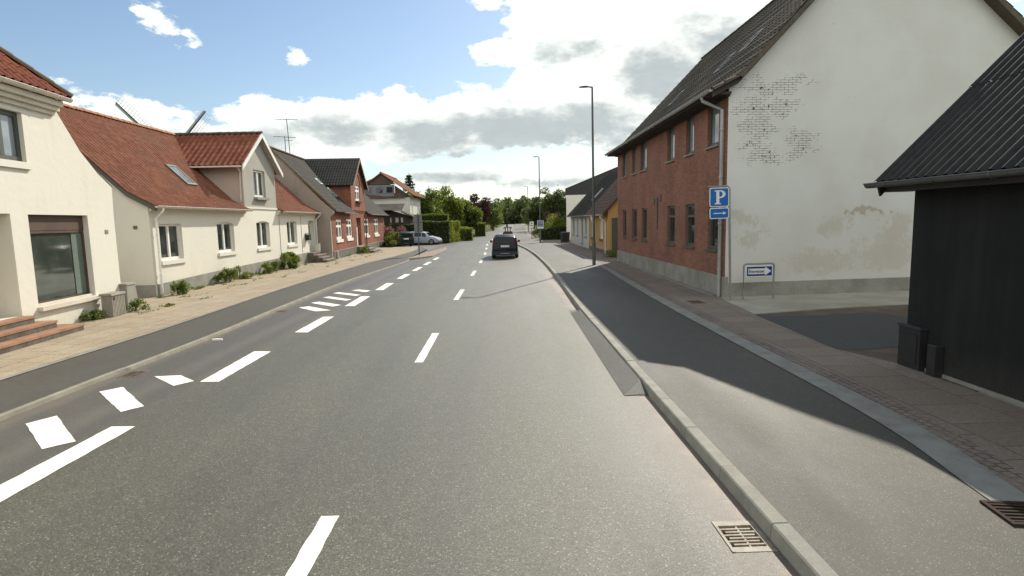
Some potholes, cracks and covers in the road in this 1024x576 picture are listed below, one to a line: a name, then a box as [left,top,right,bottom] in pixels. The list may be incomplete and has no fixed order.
drain grate [979,500,1024,527]
drain grate [711,521,778,553]
